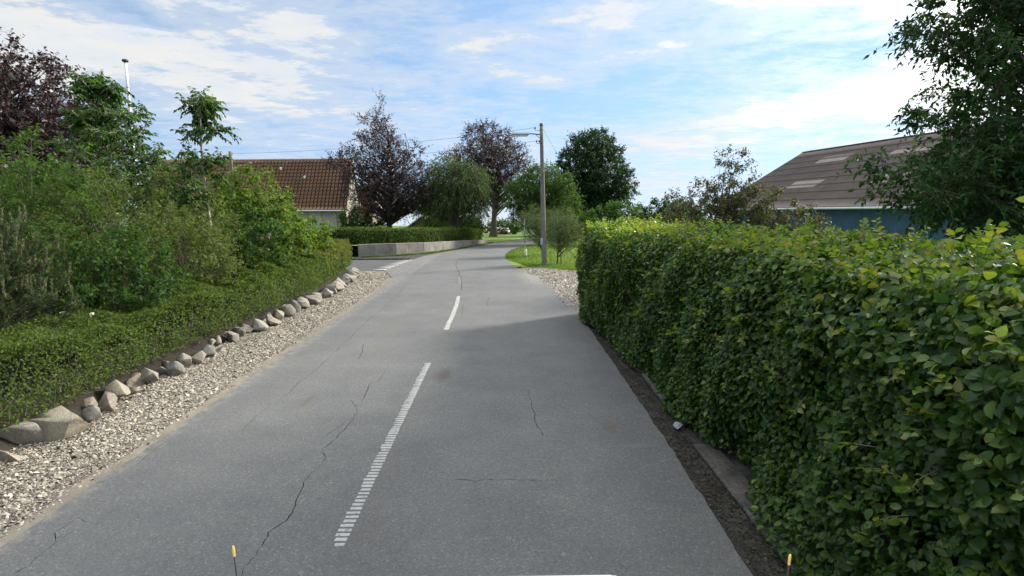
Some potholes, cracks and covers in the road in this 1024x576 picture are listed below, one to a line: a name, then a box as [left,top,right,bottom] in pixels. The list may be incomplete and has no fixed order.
crack [241,380,379,576]
